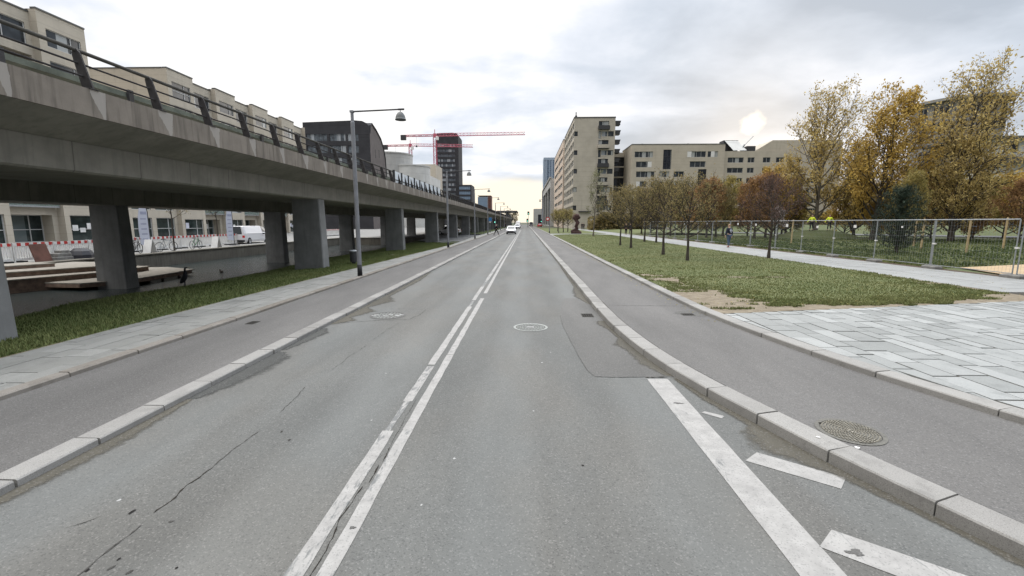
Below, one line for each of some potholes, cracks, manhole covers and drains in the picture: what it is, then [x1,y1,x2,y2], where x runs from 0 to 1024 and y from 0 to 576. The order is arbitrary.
crack [66,432,258,576]
manhole cover [814,418,888,446]
manhole cover [514,323,548,331]
